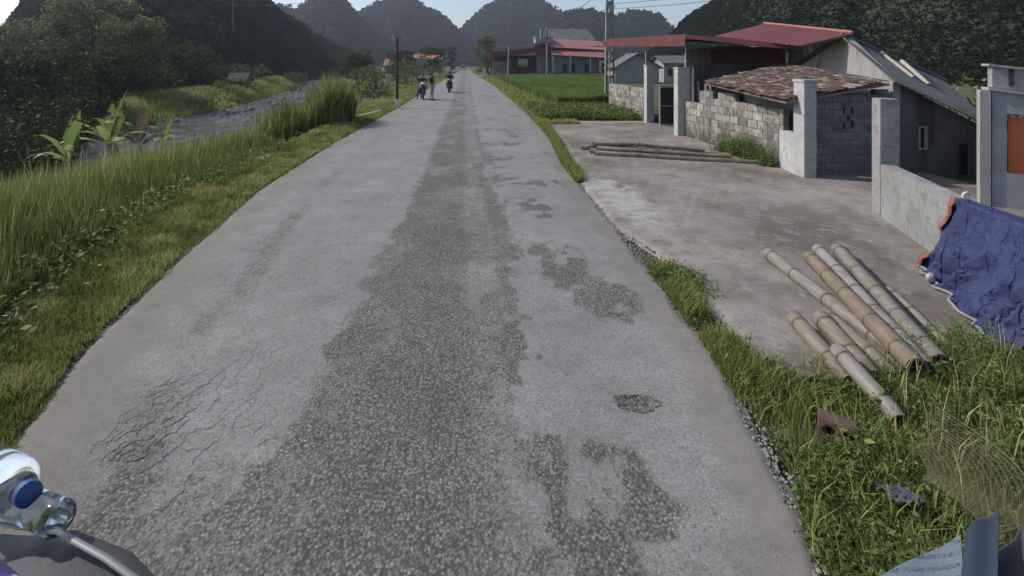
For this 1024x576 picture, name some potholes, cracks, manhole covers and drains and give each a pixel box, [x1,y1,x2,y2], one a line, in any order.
pothole [613,394,663,413]
crack [91,257,358,514]
